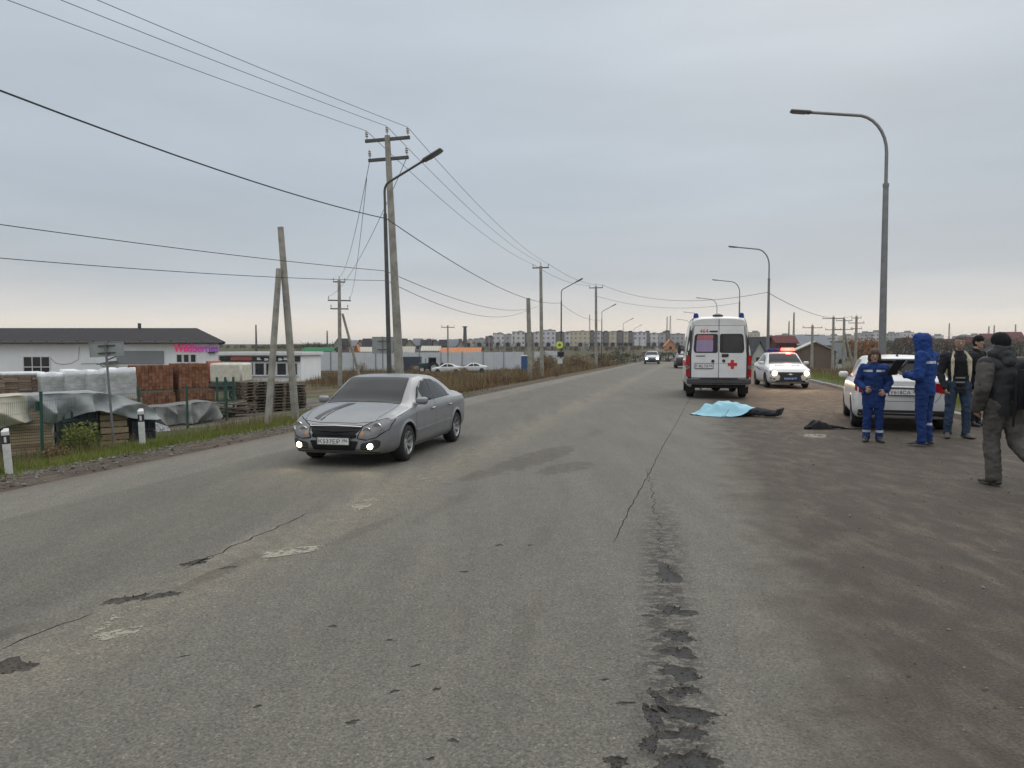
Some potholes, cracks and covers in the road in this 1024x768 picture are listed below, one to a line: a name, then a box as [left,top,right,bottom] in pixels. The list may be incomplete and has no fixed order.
pothole [666,684,701,698]
pothole [660,628,697,642]
pothole [652,725,710,740]
pothole [651,604,703,617]
pothole [0,656,40,674]
pothole [656,561,683,584]
pothole [657,645,698,660]
pothole [100,591,154,605]
pothole [654,745,724,768]
pothole [646,687,673,712]
pothole [638,735,659,754]
